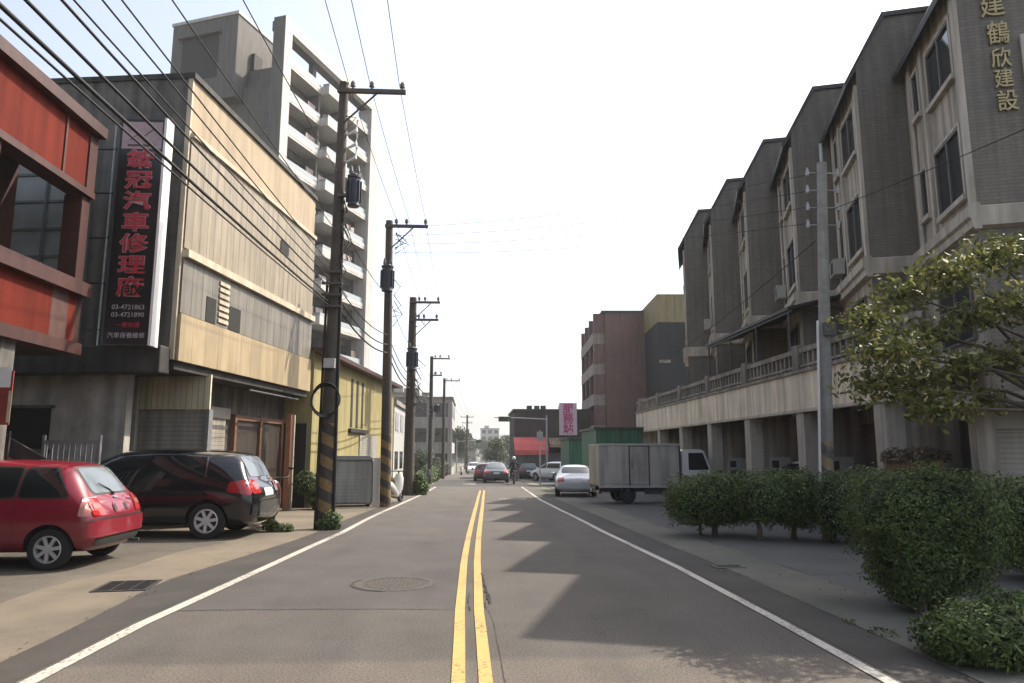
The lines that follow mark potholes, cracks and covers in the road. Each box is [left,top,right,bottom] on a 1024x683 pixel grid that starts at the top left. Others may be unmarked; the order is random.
manhole cover [350,576,436,592]
drain grate [89,579,162,593]
crack [467,573,506,683]
